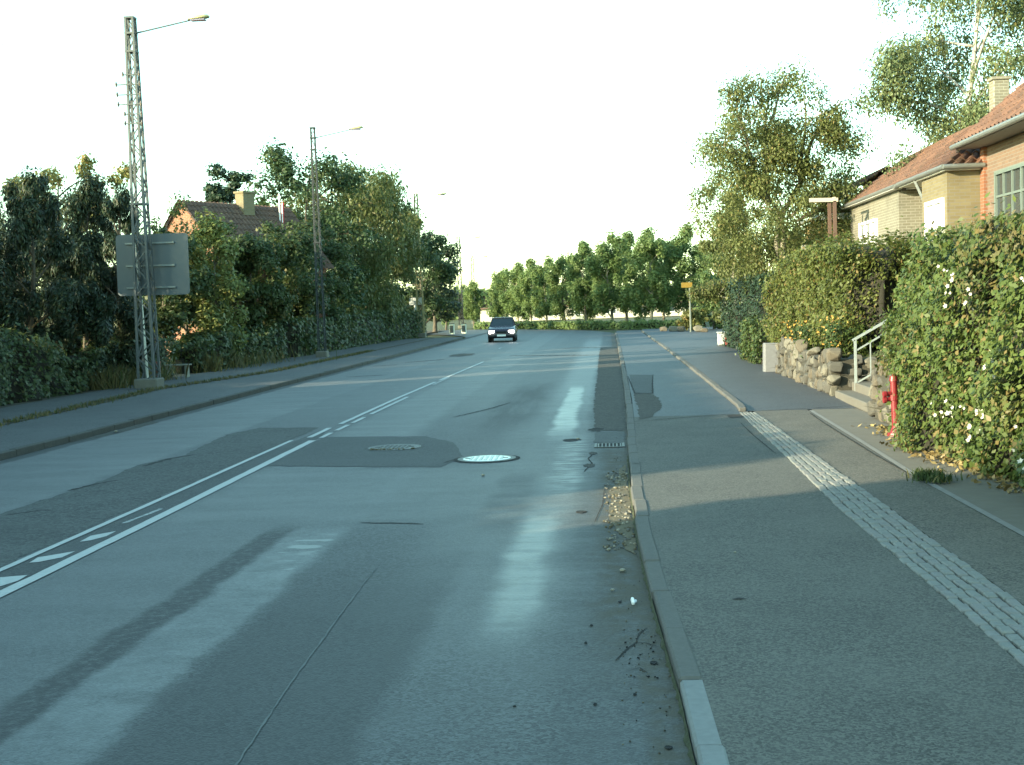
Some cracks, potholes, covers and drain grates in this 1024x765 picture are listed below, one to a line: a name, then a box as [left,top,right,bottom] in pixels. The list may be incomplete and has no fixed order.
manhole cover [453,454,520,463]
